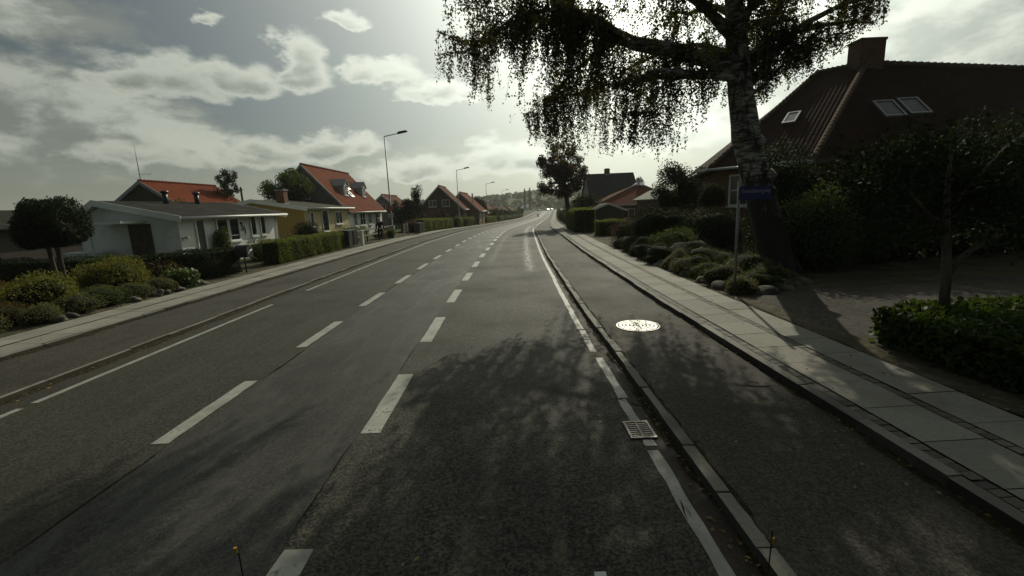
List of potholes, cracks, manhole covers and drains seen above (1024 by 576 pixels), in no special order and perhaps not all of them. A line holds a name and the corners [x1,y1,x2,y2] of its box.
drain grate [622,420,658,439]
manhole cover [616,320,660,332]
